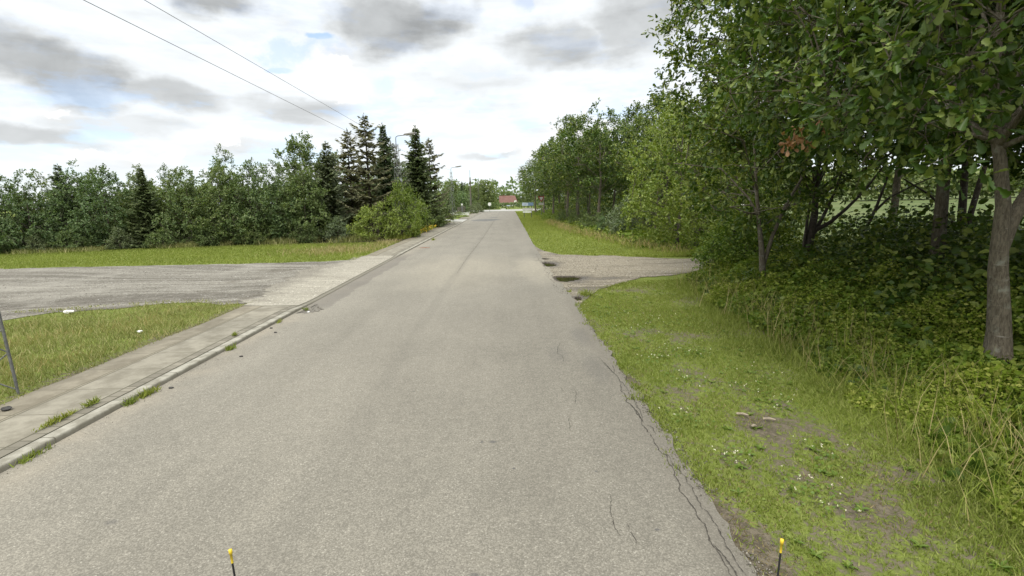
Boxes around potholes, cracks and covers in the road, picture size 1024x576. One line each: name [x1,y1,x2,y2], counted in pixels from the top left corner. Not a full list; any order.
crack [601,359,746,575]
